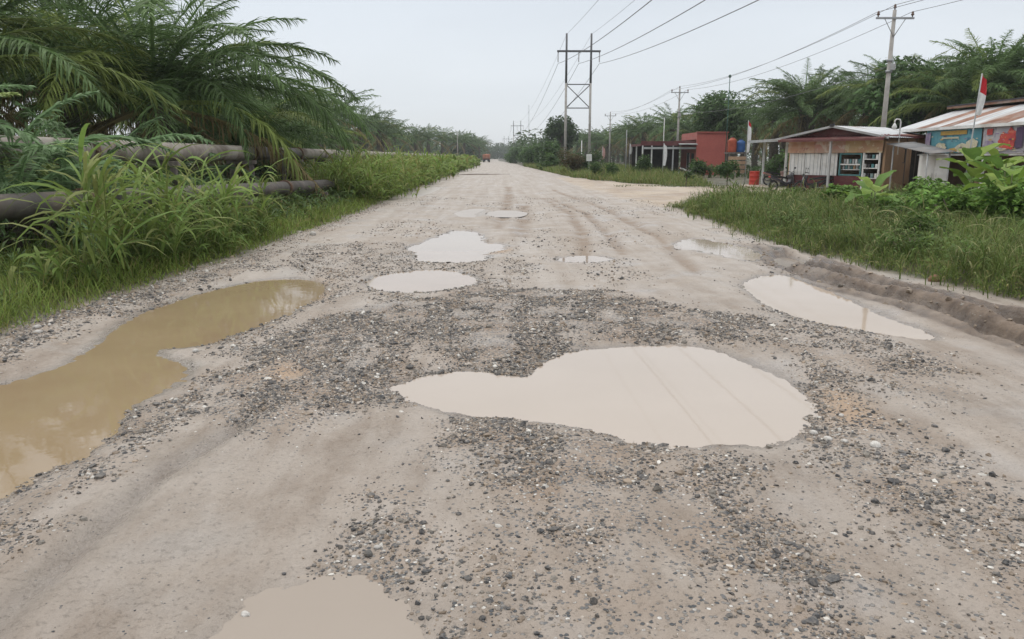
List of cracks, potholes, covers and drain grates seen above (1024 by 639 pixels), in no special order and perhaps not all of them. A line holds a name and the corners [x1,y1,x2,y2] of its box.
pothole [388,343,822,449]
pothole [453,208,488,217]
pothole [0,277,331,504]
pothole [363,268,482,293]
pothole [191,568,433,639]
pothole [484,210,527,218]
pothole [404,229,509,263]
pothole [673,238,766,261]
pothole [739,273,941,341]
